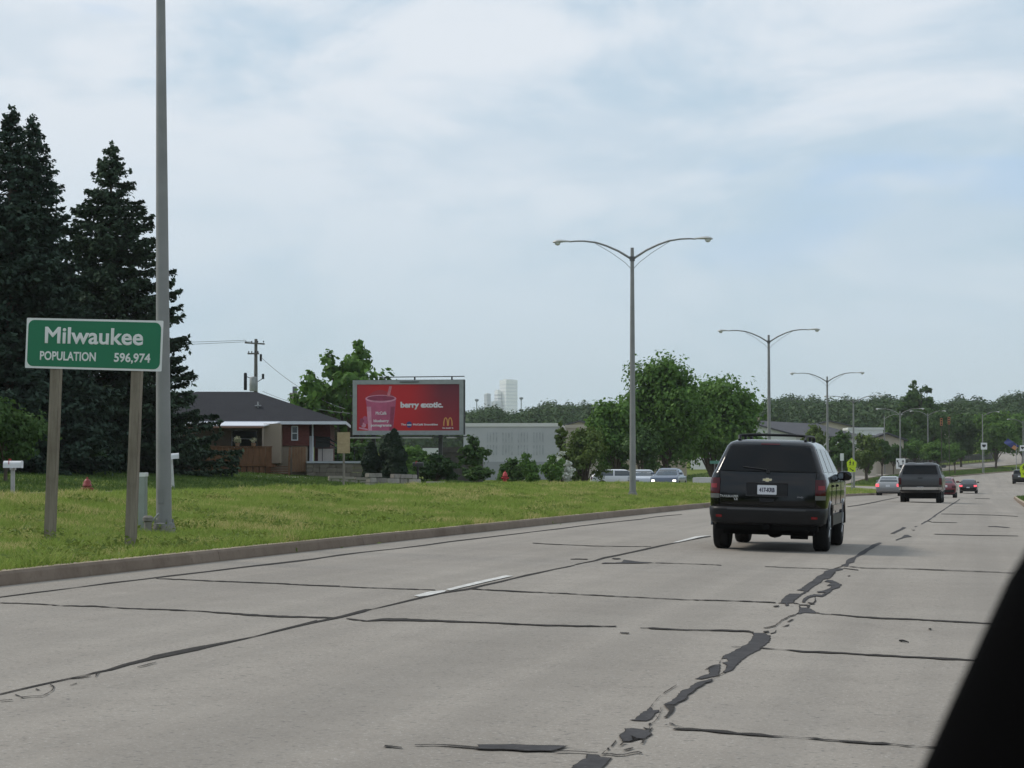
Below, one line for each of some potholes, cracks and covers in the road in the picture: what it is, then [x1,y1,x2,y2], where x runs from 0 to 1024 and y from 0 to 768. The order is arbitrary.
crack [539,543,1010,573]
